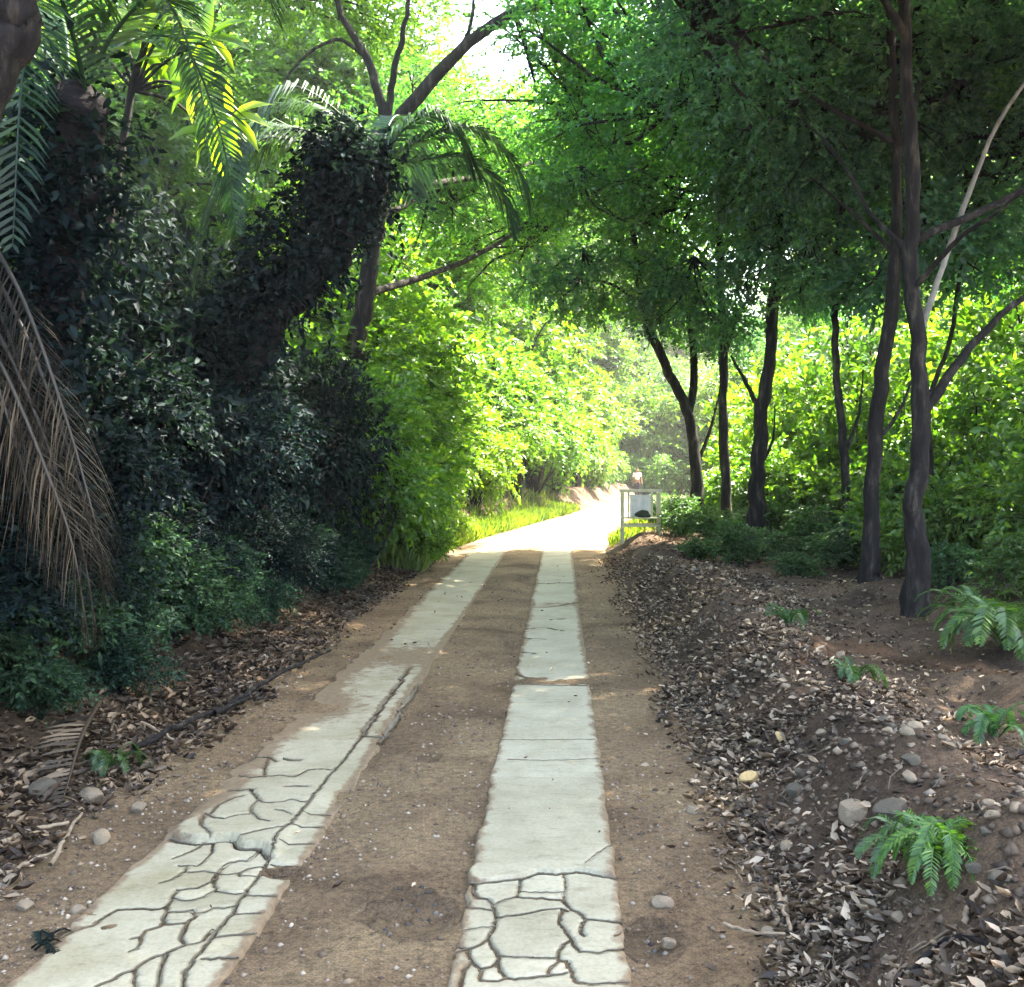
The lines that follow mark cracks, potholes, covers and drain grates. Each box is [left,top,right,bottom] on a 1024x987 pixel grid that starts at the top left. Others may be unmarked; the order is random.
crack [61,667,419,987]
crack [452,841,630,986]
